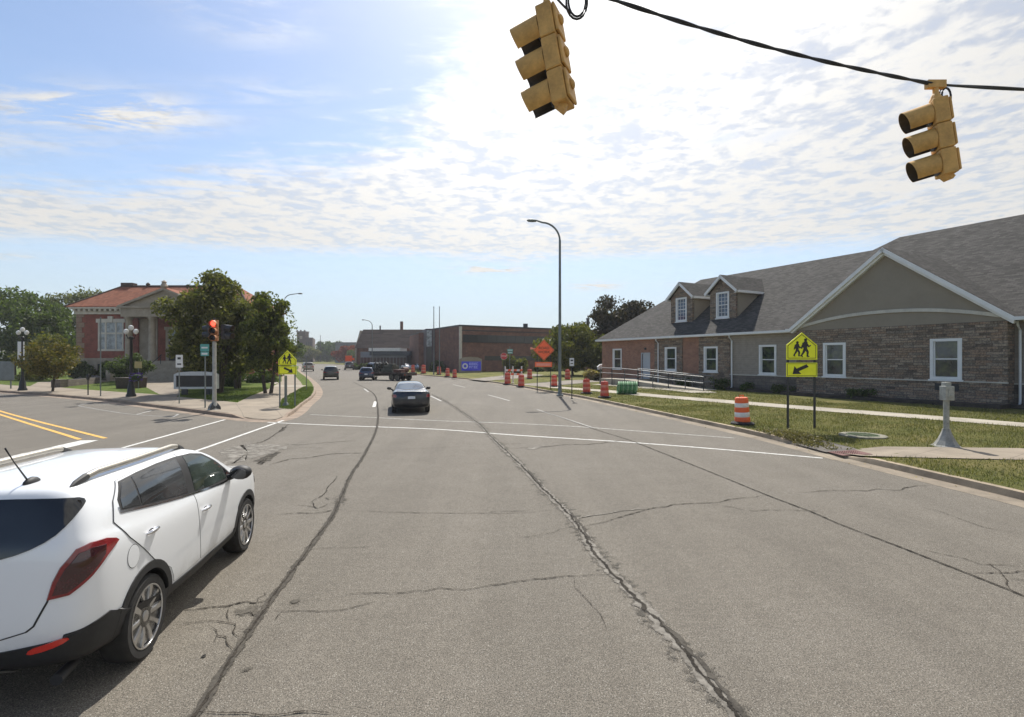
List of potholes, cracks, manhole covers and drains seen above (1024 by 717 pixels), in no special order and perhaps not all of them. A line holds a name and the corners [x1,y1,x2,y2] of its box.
crack [574,485,923,526]
crack [329,574,607,629]
crack [180,592,280,649]
crack [286,476,346,514]
